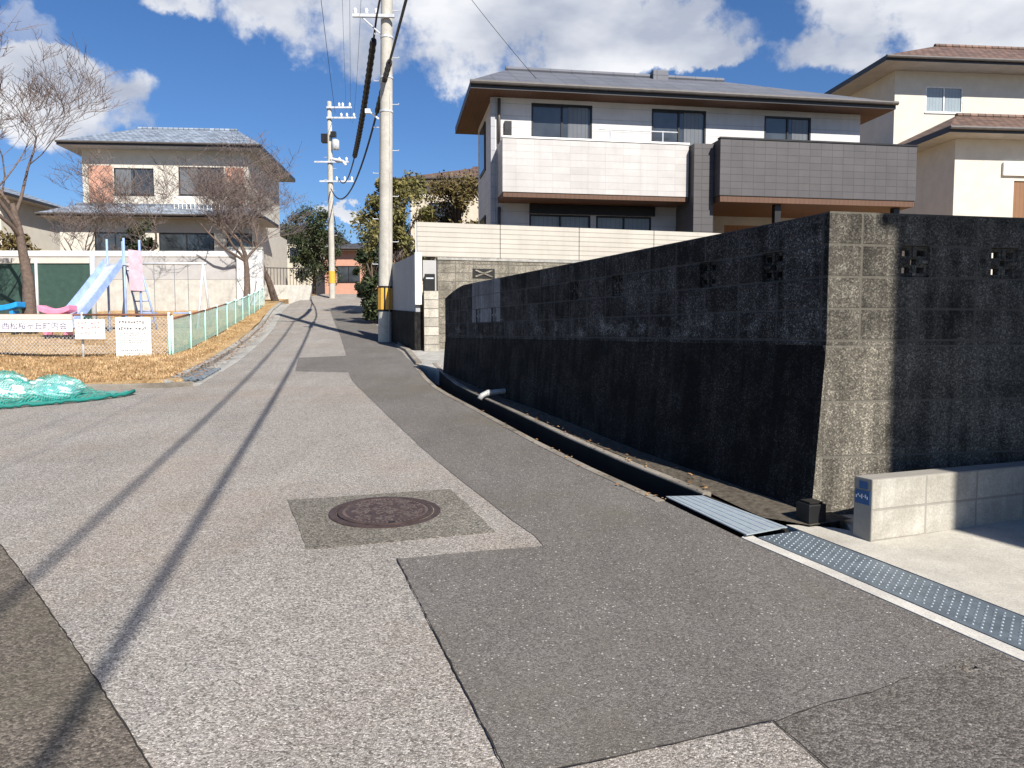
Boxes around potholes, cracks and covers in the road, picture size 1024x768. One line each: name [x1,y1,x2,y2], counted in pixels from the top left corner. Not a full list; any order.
manhole cover [328,497,441,528]
